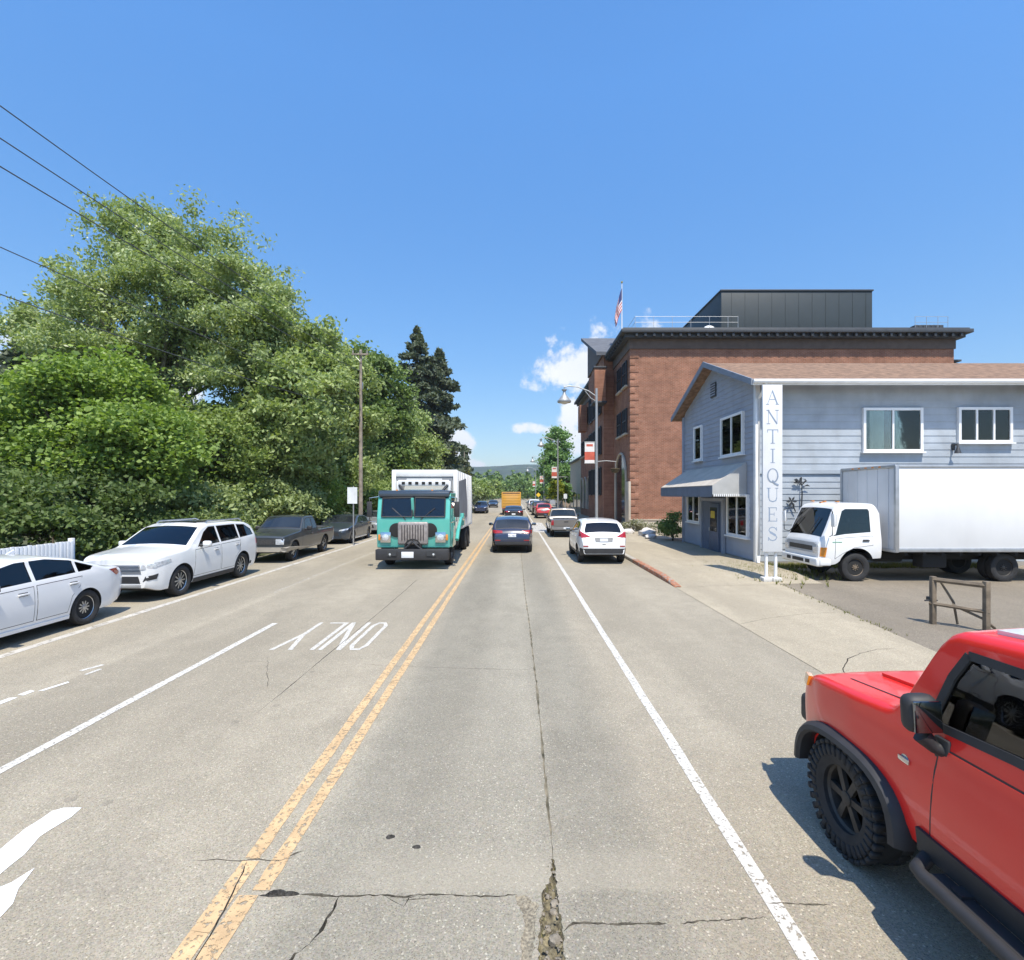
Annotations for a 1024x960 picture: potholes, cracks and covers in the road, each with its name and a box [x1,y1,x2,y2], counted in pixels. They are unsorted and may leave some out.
crack [564,902,829,931]
crack [194,851,302,960]
crack [289,893,516,960]
